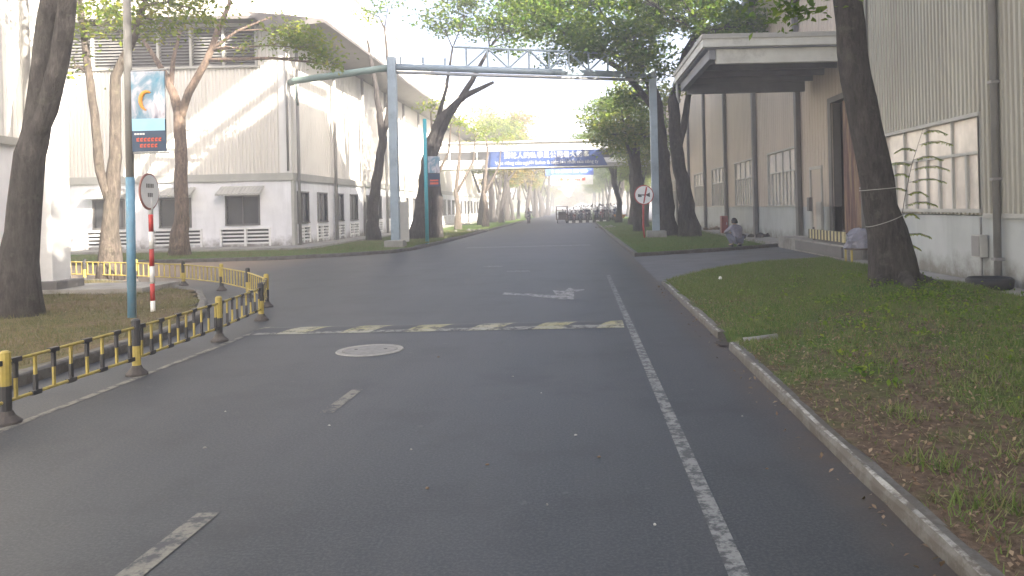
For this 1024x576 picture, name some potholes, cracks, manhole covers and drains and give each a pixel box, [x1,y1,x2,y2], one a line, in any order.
manhole cover [335,344,404,357]
